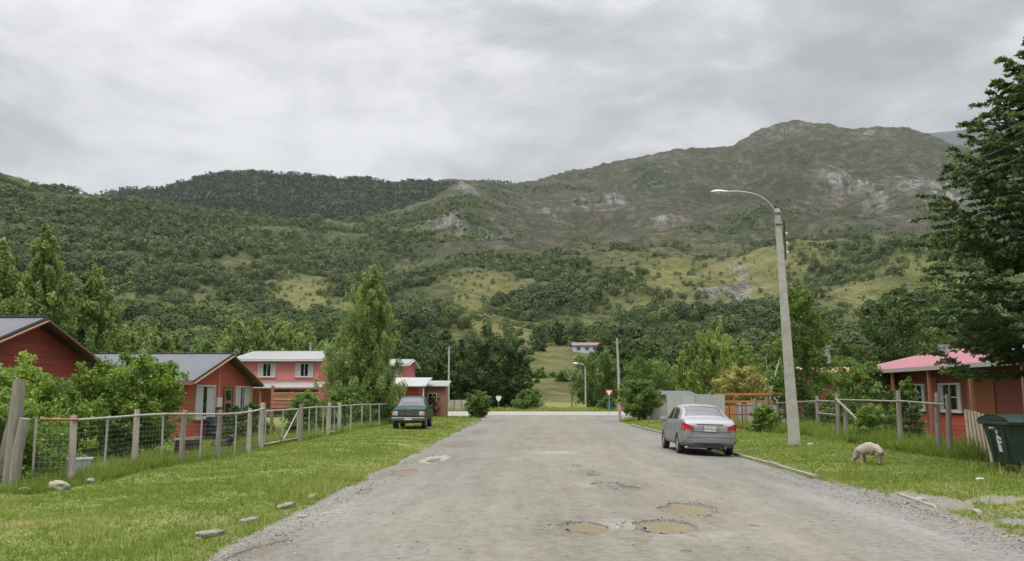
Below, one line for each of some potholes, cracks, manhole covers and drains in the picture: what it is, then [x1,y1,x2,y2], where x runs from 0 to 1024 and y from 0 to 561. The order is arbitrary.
pothole [605,517,698,534]
pothole [535,520,609,535]
pothole [656,500,720,517]
pothole [417,455,451,464]
pothole [589,481,642,491]
